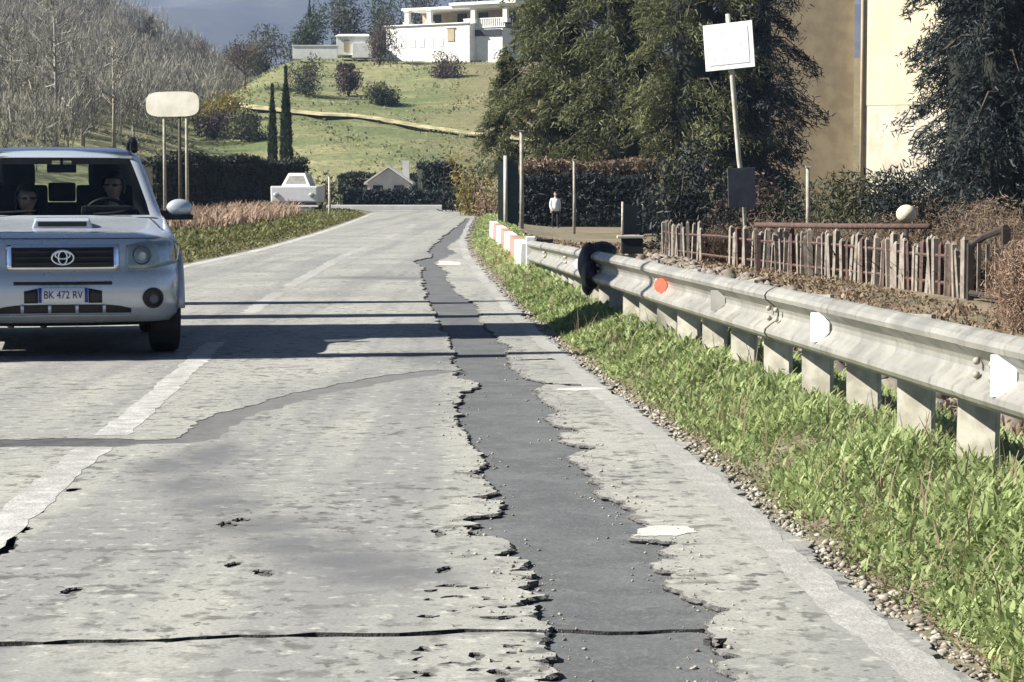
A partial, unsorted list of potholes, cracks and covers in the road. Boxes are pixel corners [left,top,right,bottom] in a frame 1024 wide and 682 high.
pothole [252,569,275,577]
